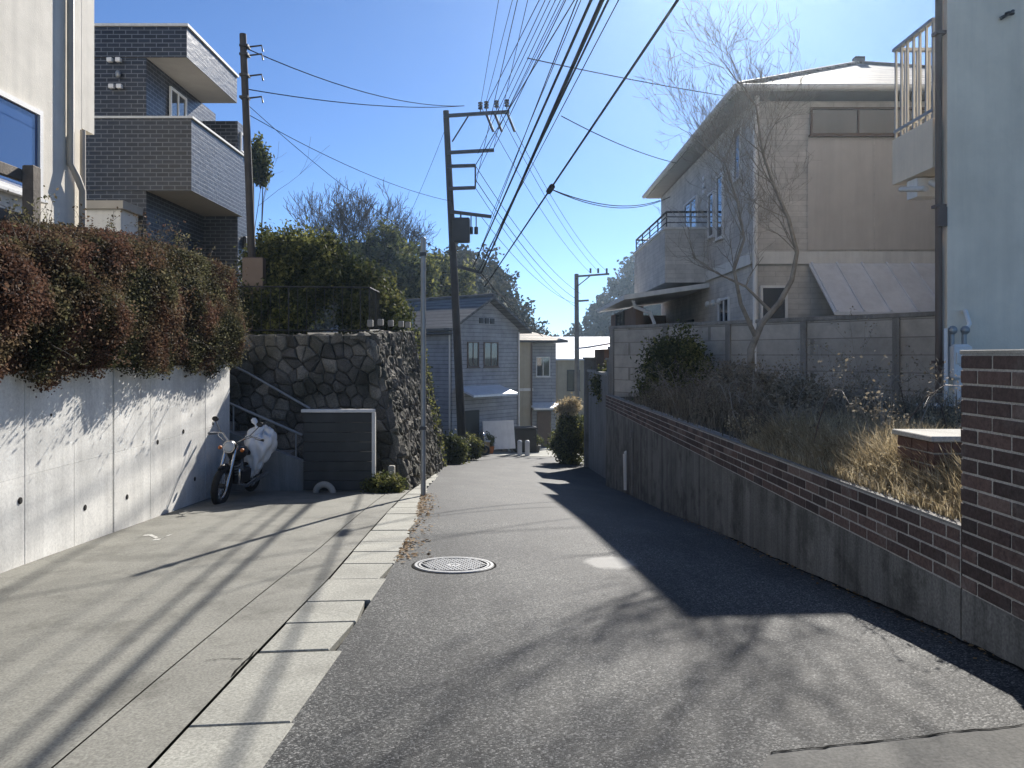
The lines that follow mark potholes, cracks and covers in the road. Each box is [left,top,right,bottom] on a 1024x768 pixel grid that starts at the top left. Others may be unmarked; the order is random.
manhole cover [411,557,497,574]
